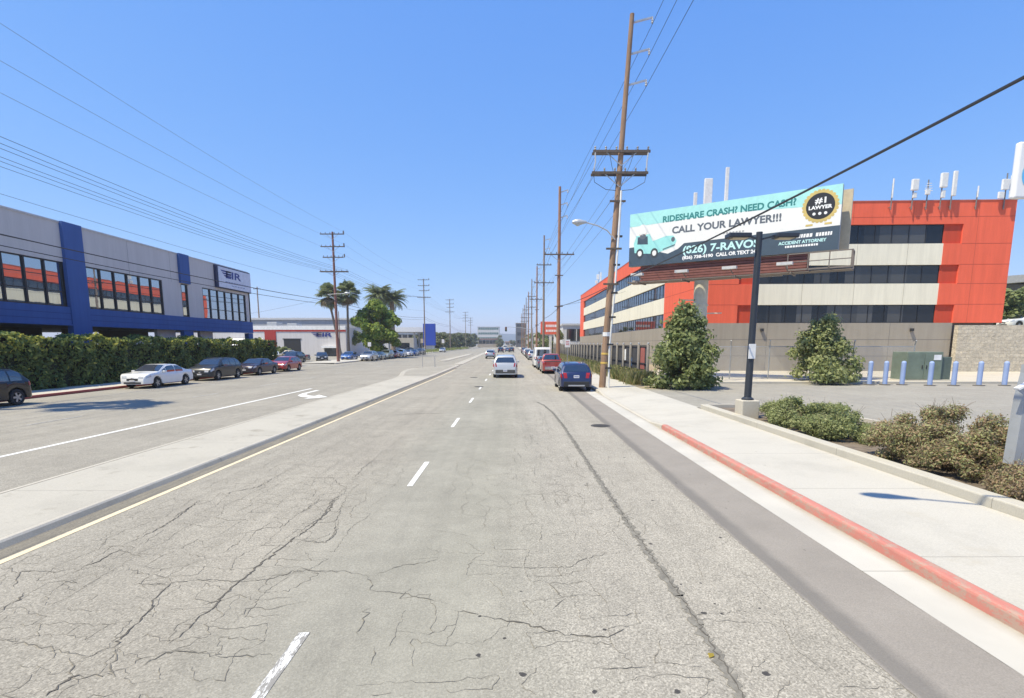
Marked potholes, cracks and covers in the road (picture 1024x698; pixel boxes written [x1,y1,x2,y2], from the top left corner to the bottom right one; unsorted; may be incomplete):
crack [512,415,588,503]
crack [0,415,433,698]
crack [356,459,714,698]
